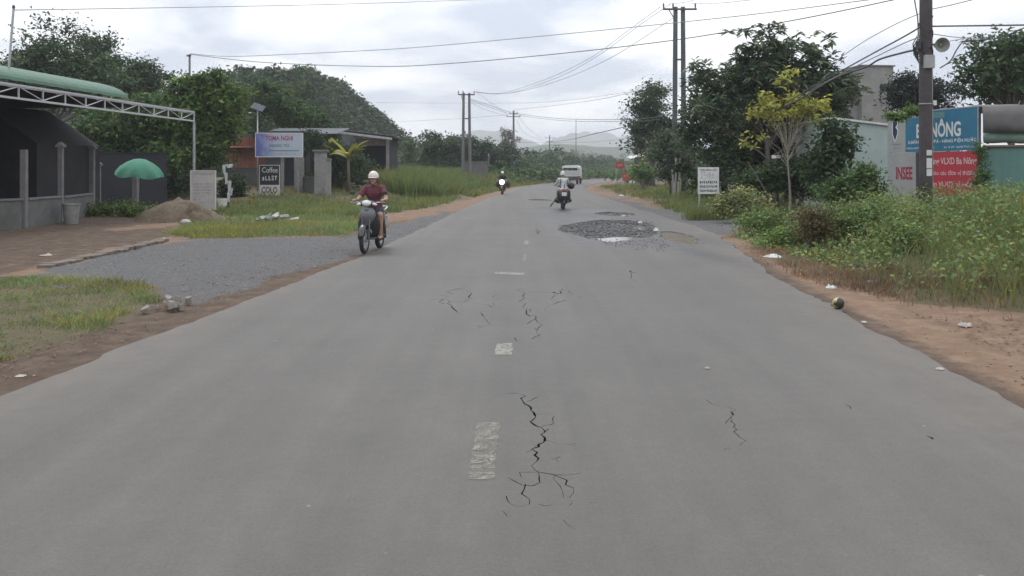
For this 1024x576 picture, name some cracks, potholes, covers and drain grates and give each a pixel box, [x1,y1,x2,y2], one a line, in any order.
pothole [659,231,699,244]
pothole [558,220,658,242]
crack [506,393,574,526]
